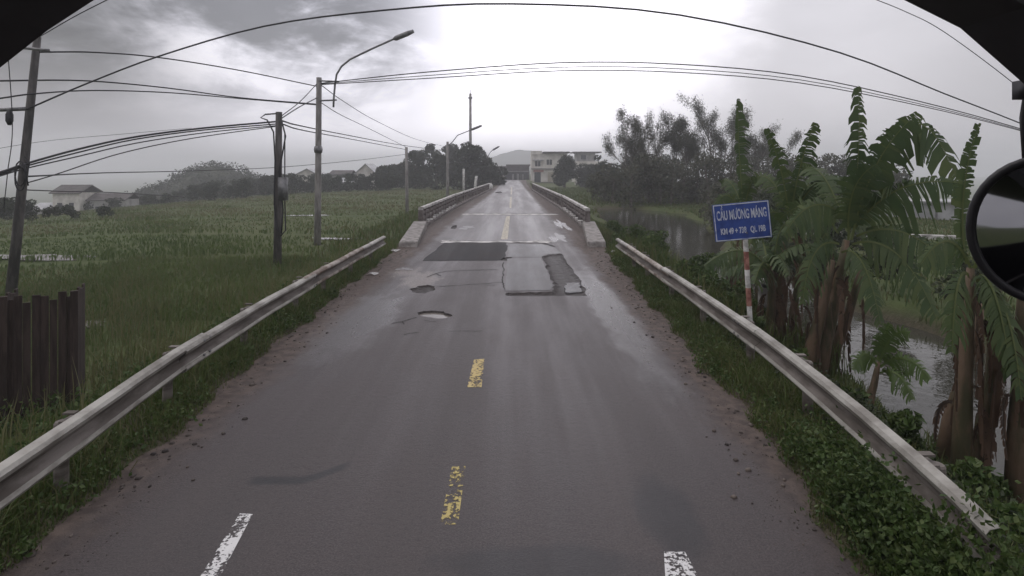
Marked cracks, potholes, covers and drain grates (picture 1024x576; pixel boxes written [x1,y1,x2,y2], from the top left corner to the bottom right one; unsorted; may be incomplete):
pothole [410,285,435,293]
crack [427,262,505,289]
